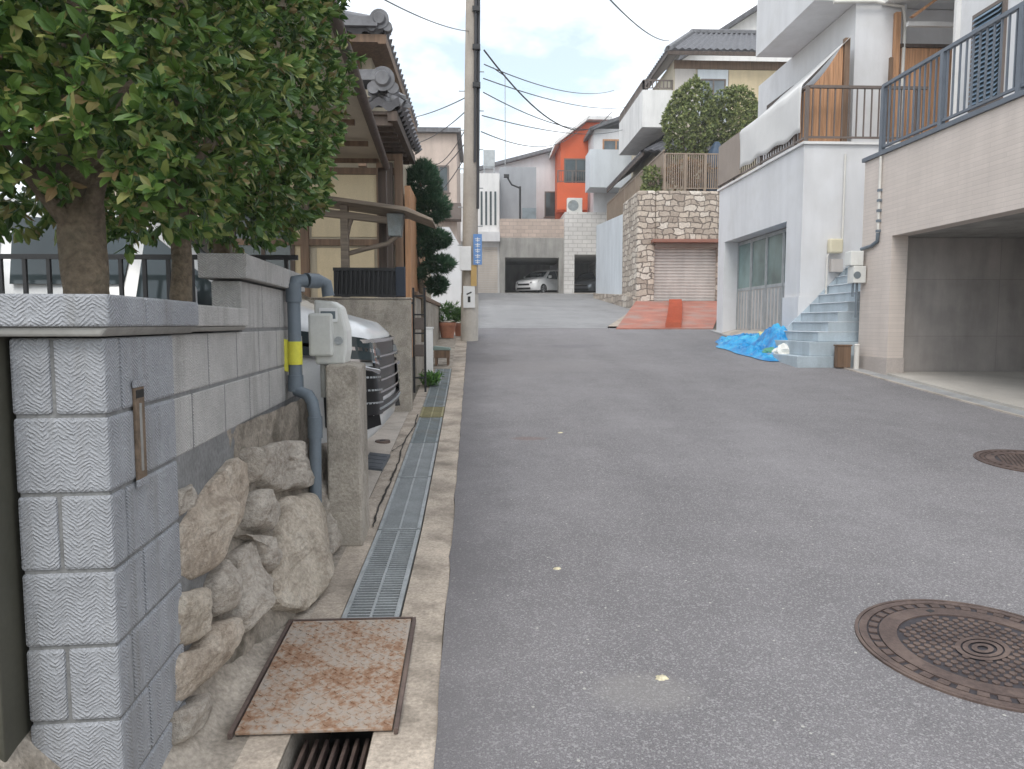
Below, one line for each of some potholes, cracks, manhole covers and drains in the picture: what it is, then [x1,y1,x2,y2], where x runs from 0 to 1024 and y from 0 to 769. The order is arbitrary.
drain grate [378,477,431,534]
drain grate [419,407,445,418]
manhole cover [973,449,1024,472]
crack [372,414,418,527]
drain grate [423,385,449,407]
manhole cover [854,599,1024,713]
drain grate [341,530,420,618]
drain grate [431,369,451,386]
drain grate [398,442,438,479]
drain grate [293,738,369,769]
drain grate [410,417,443,443]
